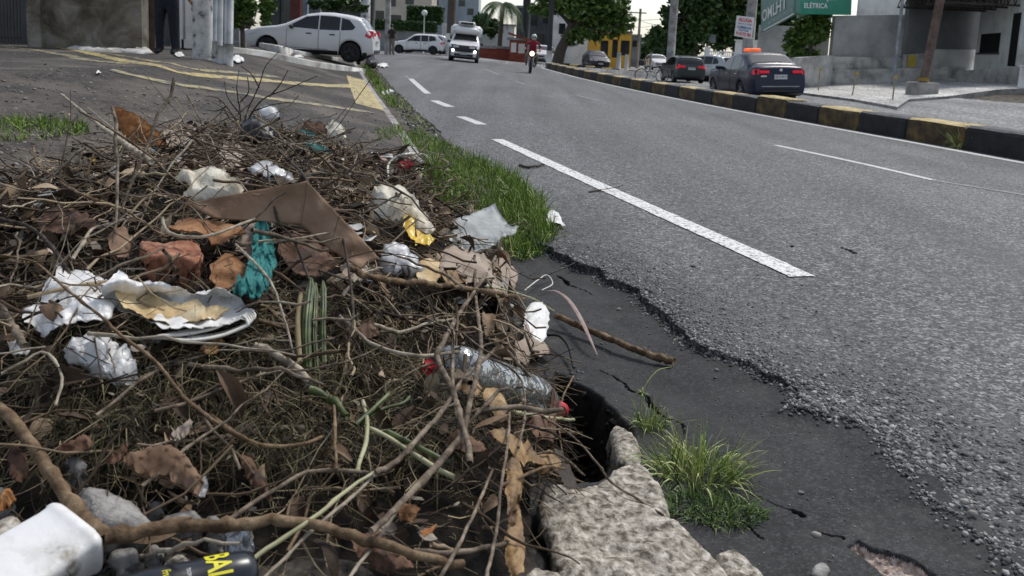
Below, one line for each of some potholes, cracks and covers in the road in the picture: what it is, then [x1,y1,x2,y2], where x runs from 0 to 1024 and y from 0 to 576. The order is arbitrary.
pothole [836,533,947,576]
crack [594,368,692,438]
pothole [523,369,645,488]
crack [553,274,596,297]
crack [739,492,847,542]
